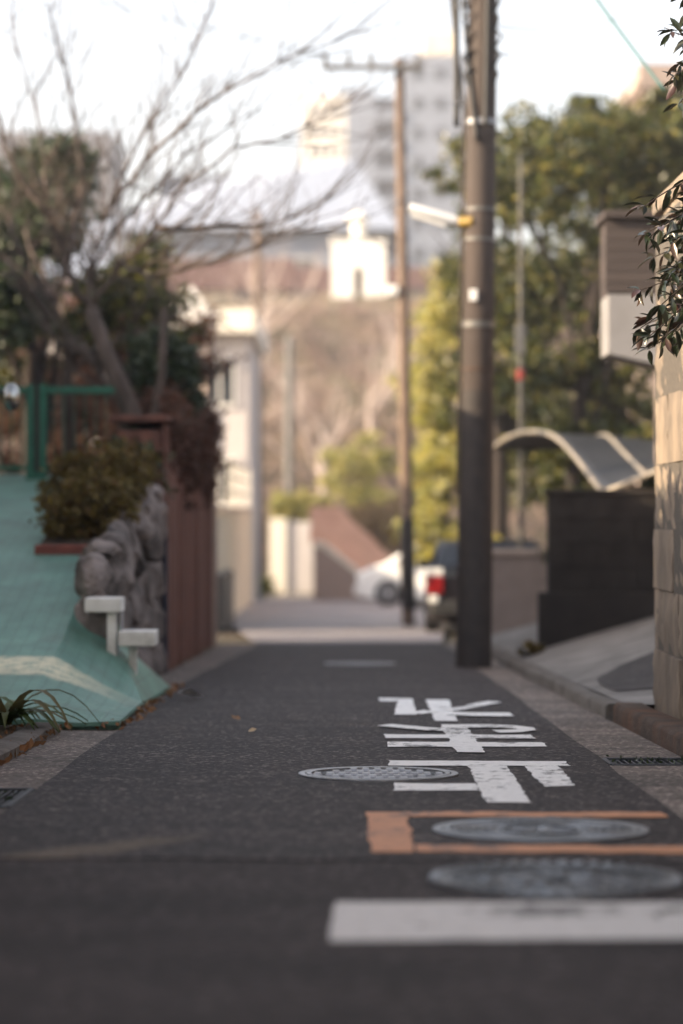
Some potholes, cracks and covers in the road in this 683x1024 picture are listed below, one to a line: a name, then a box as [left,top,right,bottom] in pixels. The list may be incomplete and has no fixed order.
manhole cover [298,766,458,782]
manhole cover [429,860,683,898]
drain grate [0,788,35,809]
manhole cover [432,817,649,843]
drain grate [602,755,683,766]
